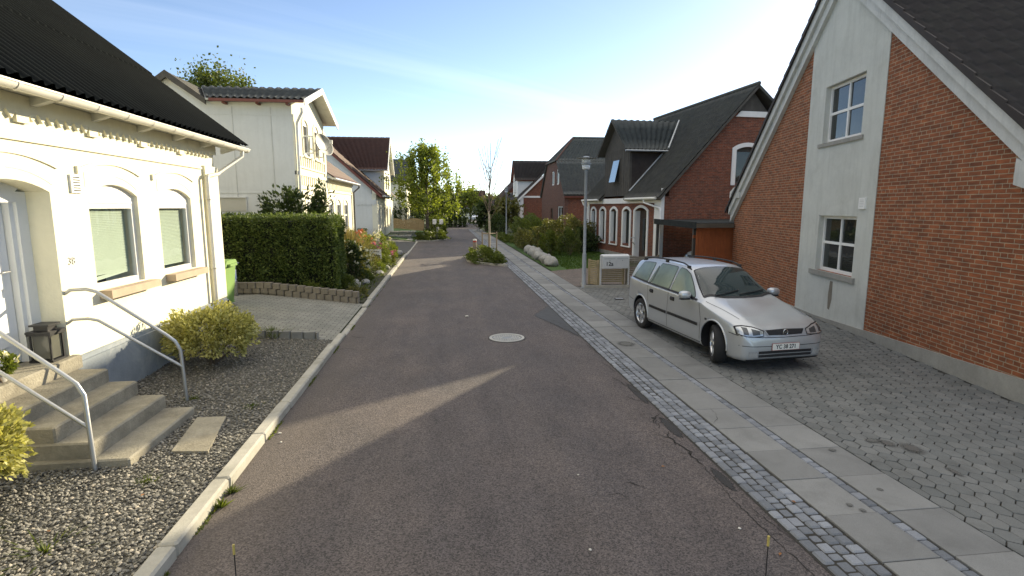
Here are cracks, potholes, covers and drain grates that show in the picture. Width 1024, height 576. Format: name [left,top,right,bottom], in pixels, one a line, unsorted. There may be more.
manhole cover [488,333,526,343]
